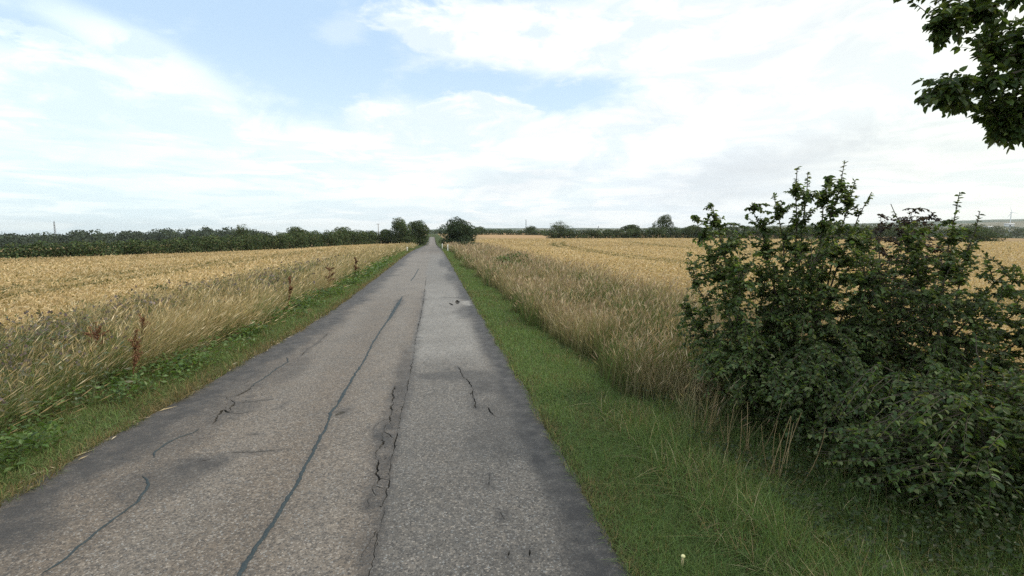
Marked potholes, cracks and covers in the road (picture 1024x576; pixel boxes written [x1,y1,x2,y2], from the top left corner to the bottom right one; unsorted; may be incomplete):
crack [458,367,493,415]
crack [359,281,426,576]
crack [205,388,284,423]
